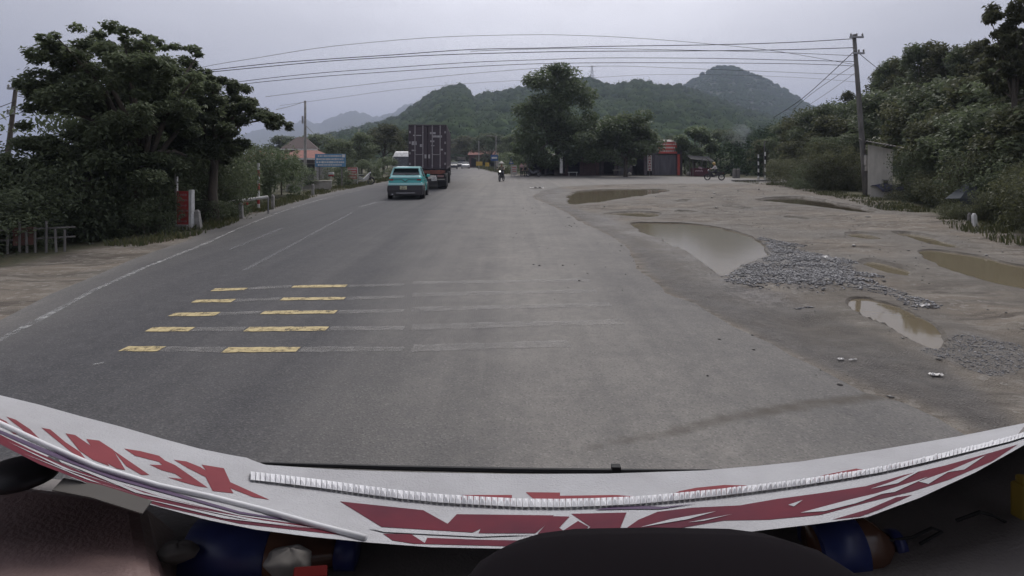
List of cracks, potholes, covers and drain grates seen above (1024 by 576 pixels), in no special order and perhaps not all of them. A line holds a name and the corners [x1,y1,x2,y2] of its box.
pothole [630,222,770,275]
pothole [845,296,948,349]
pothole [917,249,1024,289]
pothole [565,189,669,204]
pothole [755,196,880,213]
pothole [857,258,918,275]
